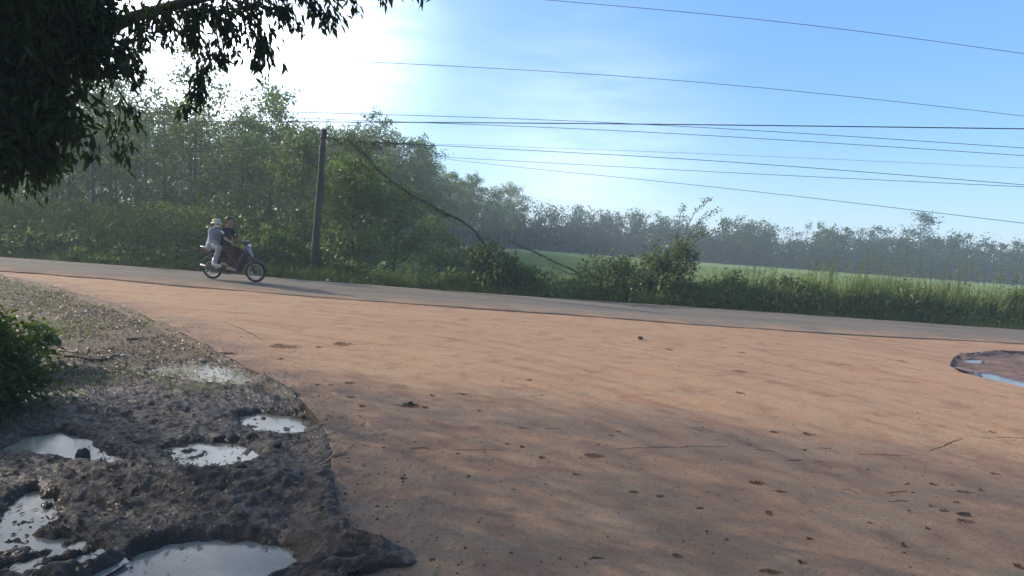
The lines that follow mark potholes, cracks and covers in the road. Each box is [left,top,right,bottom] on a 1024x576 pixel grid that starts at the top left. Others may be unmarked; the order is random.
pothole [981,374,1024,387]
pothole [162,442,259,467]
pothole [239,414,307,433]
pothole [106,540,297,576]
pothole [0,491,129,576]
pothole [3,433,122,463]
pothole [148,363,252,385]
